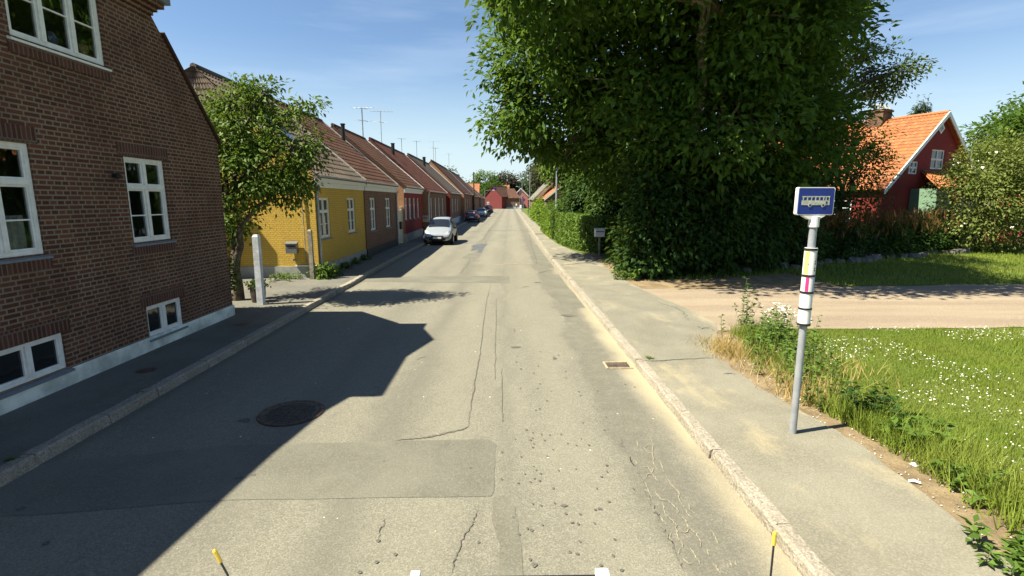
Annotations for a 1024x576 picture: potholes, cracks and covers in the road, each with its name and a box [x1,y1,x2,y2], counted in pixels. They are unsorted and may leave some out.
crack [630,438,737,574]
crack [452,512,477,573]
manhole cover [256,400,325,427]
